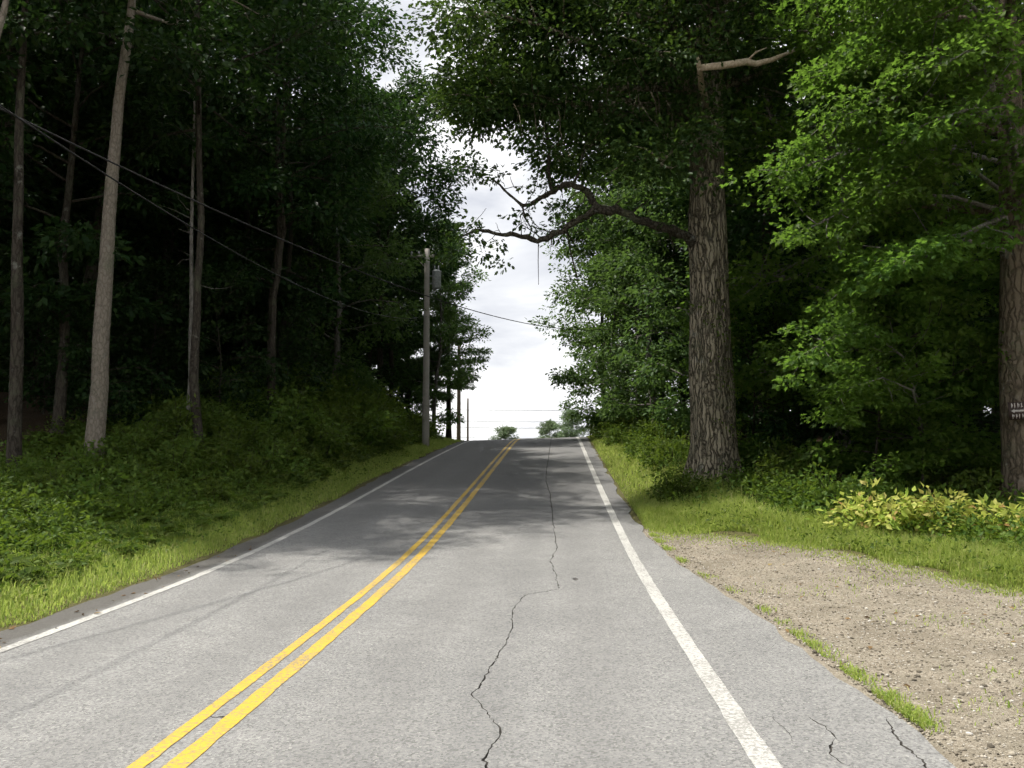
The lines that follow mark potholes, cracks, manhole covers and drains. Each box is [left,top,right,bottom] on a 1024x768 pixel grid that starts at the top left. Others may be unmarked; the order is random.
crack [809,717,856,768]
crack [471,441,560,768]
crack [886,719,927,768]
